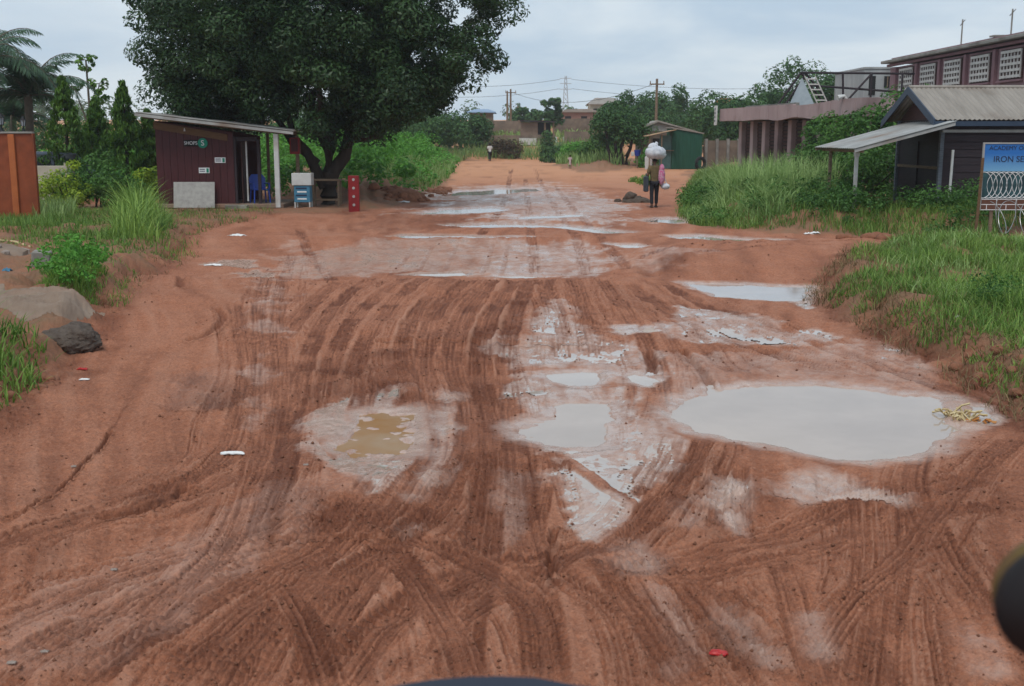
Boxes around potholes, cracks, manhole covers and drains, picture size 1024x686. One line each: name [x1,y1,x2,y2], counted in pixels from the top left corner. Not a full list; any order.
pothole [524,366,625,389]
pothole [637,376,995,469]
pothole [668,278,824,304]
pothole [309,401,434,462]
pothole [620,367,674,388]
pothole [490,394,638,453]
